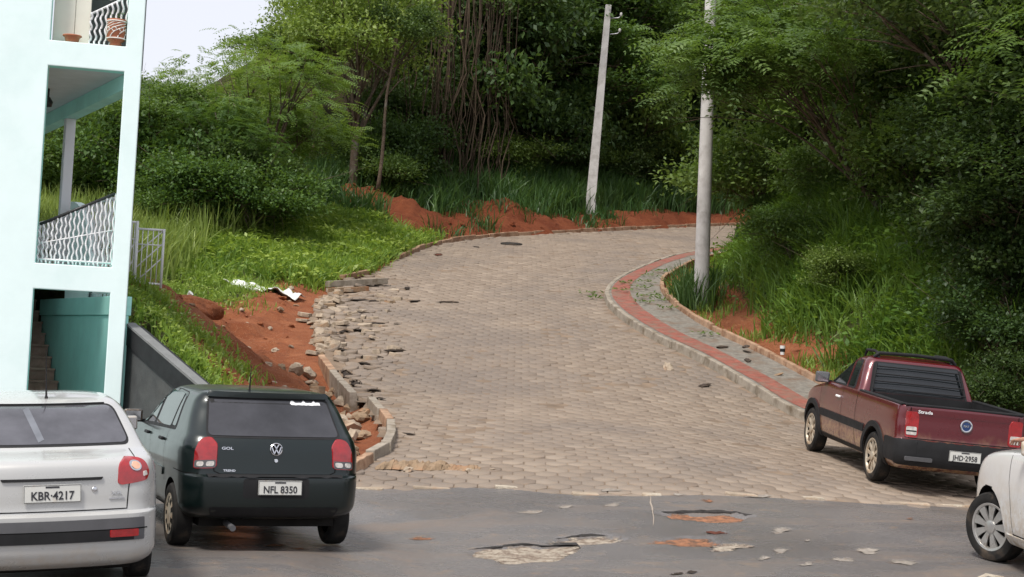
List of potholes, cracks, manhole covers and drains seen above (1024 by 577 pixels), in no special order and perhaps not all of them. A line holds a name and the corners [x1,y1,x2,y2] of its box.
pothole [550,533,621,546]
pothole [469,542,580,564]
pothole [661,510,752,523]
